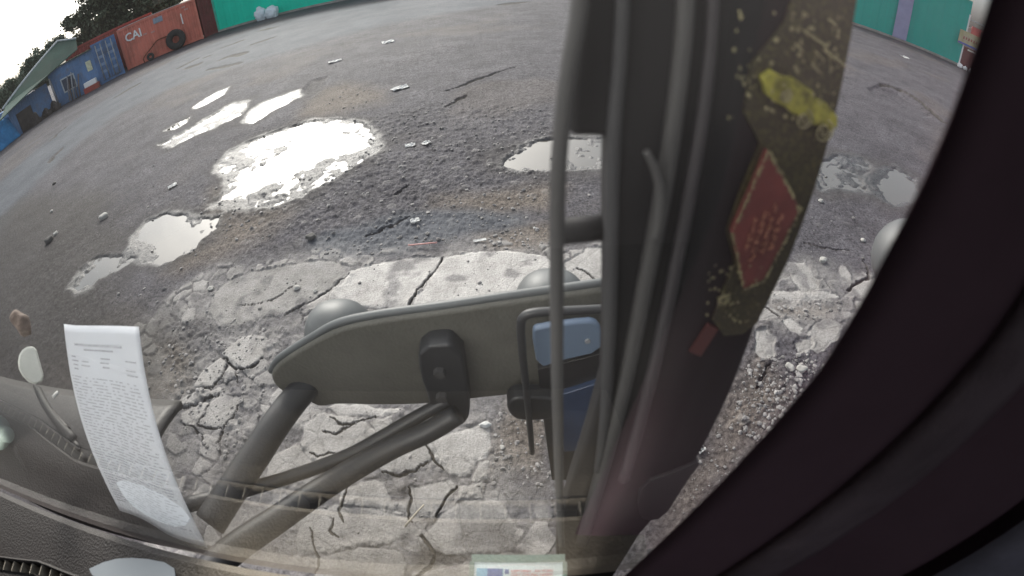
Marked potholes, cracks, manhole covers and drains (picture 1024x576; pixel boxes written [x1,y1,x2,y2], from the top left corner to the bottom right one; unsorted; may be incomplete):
crack [803,241,871,293]
crack [308,488,348,575]
pothole [119,212,220,266]
crack [239,272,350,317]
crack [381,445,458,566]
crack [308,415,377,459]
pothole [193,88,228,108]
pothole [817,153,873,193]
crack [877,82,947,124]
crack [407,256,445,305]
pothole [863,165,918,207]
